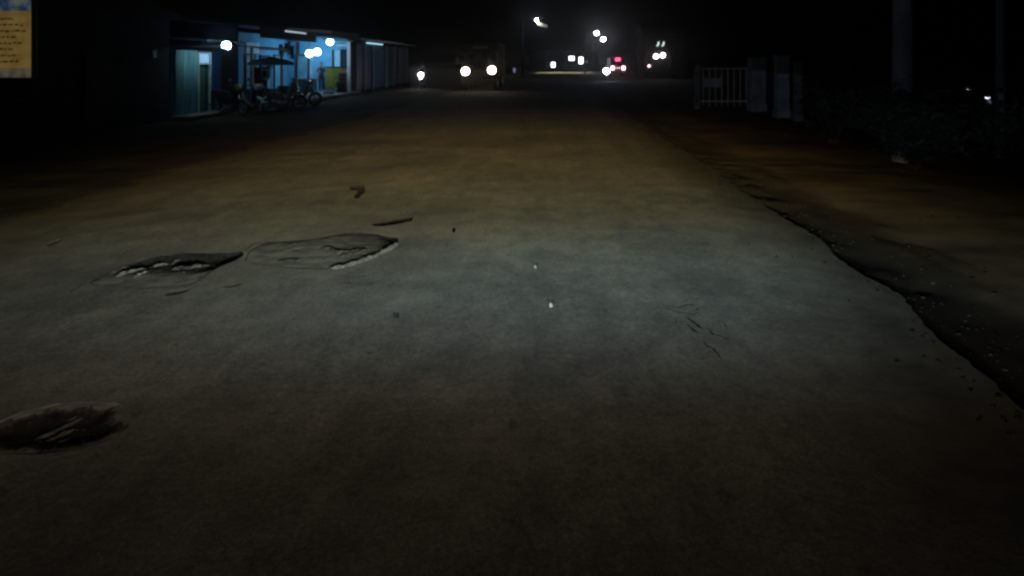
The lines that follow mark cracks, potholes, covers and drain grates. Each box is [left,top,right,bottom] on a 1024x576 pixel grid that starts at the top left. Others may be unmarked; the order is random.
crack [665,295,730,359]
pothole [90,251,244,289]
pothole [0,402,130,455]
pothole [245,233,399,271]
